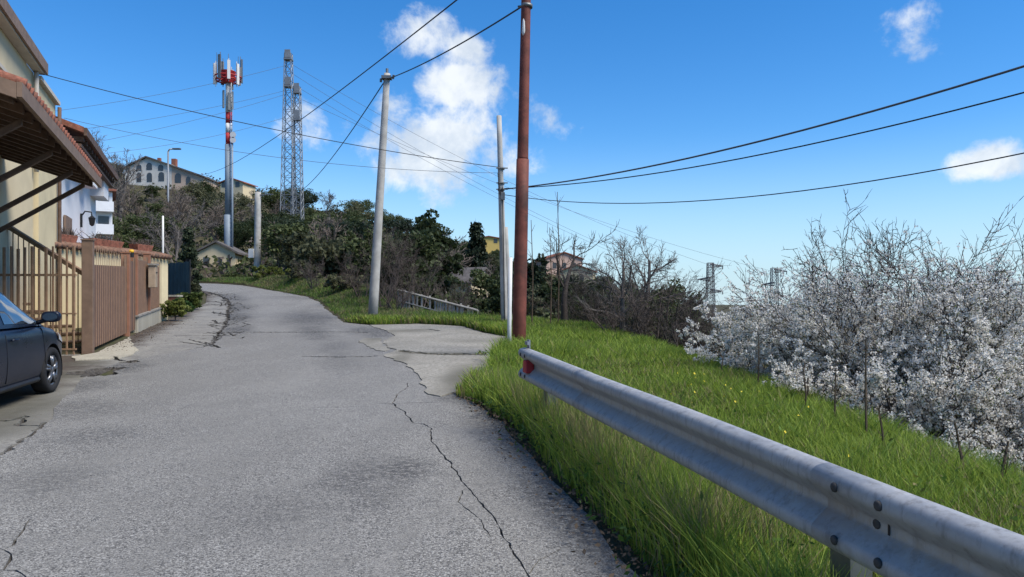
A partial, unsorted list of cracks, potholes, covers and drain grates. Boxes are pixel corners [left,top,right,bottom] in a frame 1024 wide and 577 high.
crack [0,418,45,455]
crack [183,292,279,350]
crack [394,384,524,569]
